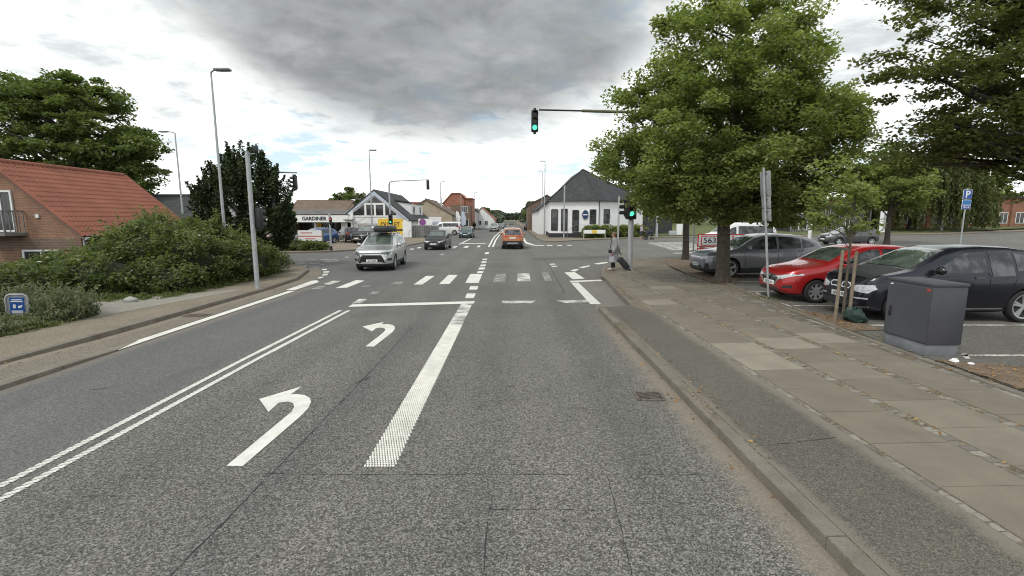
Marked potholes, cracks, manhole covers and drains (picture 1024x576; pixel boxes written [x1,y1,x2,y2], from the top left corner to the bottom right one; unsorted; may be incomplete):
drain grate [632,391,667,401]
